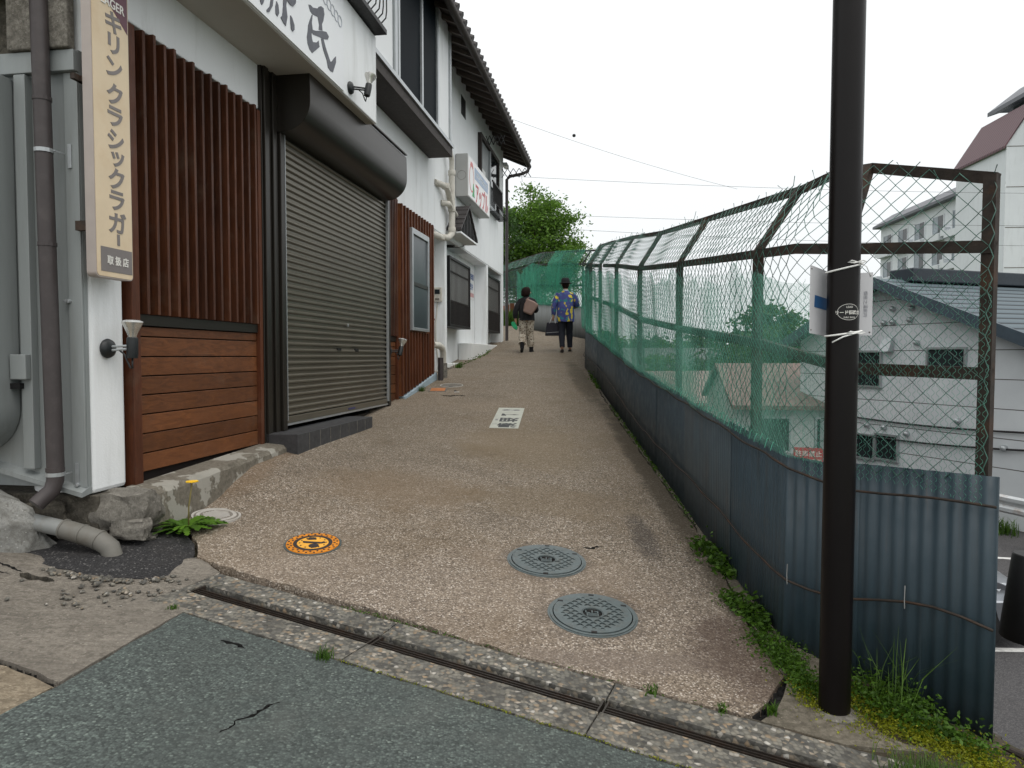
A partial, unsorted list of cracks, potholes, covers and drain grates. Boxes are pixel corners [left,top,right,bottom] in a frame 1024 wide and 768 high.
manhole cover [283,533,342,556]
crack [219,702,280,733]
manhole cover [548,593,638,638]
manhole cover [507,545,586,578]
manhole cover [191,508,241,525]
crack [221,640,244,648]
crack [0,562,22,575]
